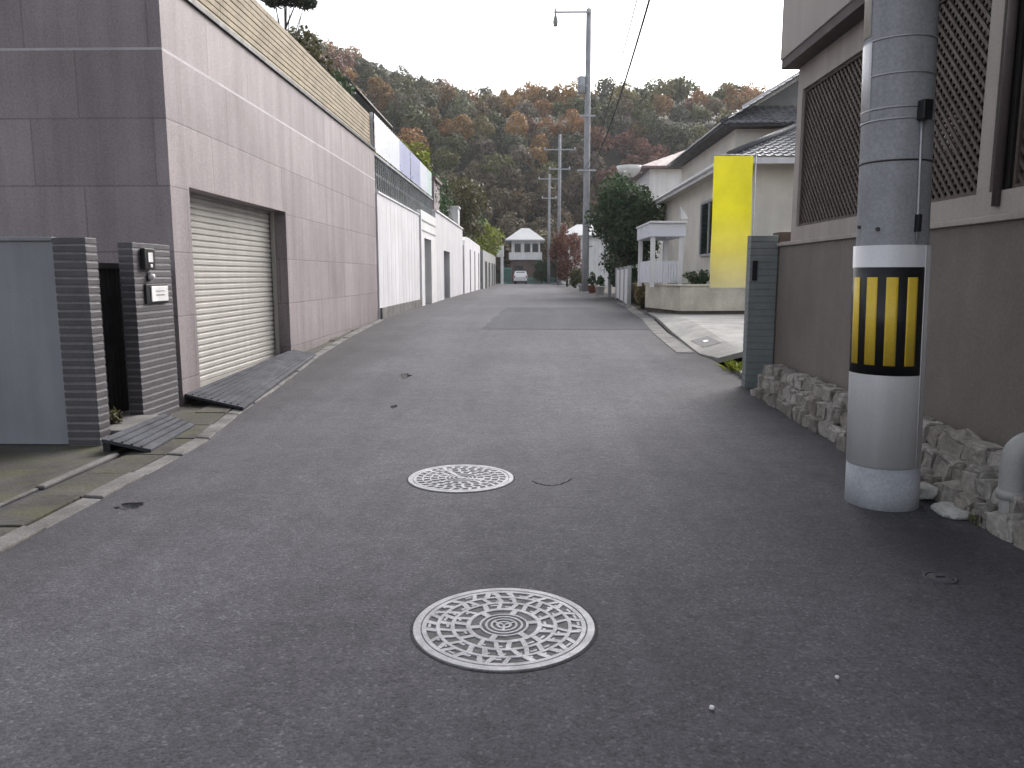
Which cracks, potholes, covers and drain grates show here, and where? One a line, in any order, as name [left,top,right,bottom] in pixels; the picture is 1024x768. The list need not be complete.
manhole cover [406,465,515,493]
pothole [113,502,144,510]
manhole cover [923,571,958,584]
manhole cover [410,588,598,674]
